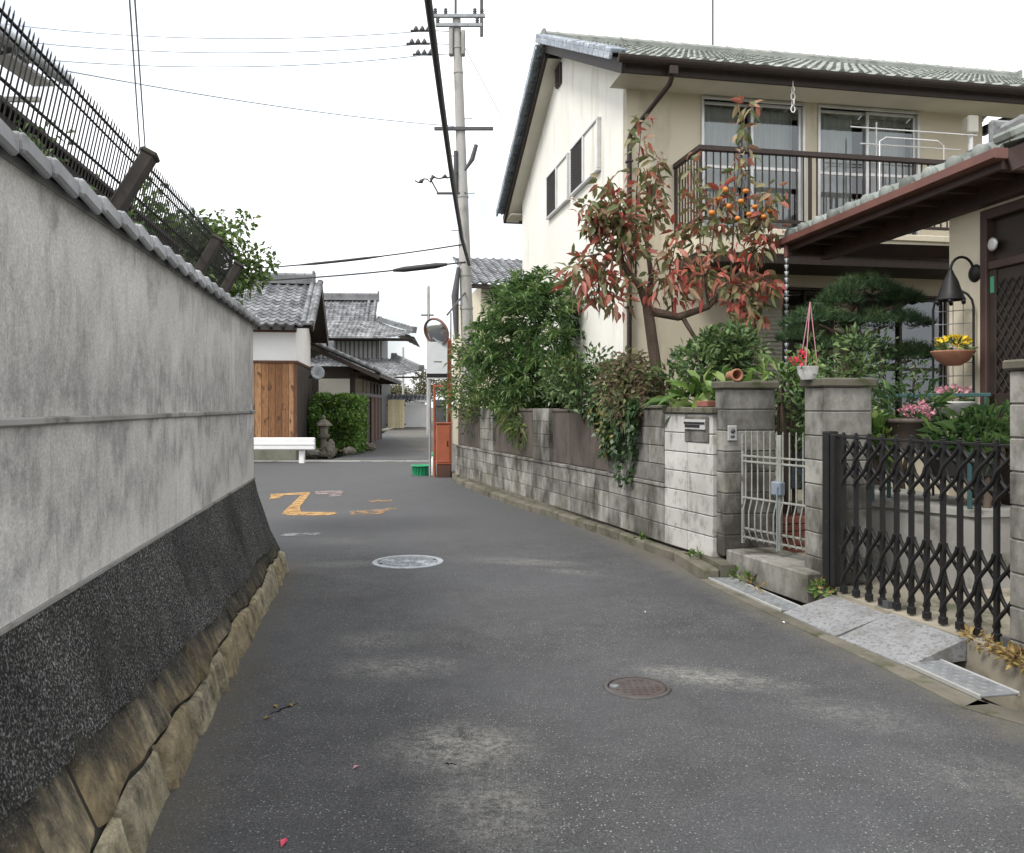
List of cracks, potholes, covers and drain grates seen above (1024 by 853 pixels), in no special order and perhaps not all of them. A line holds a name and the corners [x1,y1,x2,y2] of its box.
manhole cover [604,676,671,700]
manhole cover [372,555,443,569]
